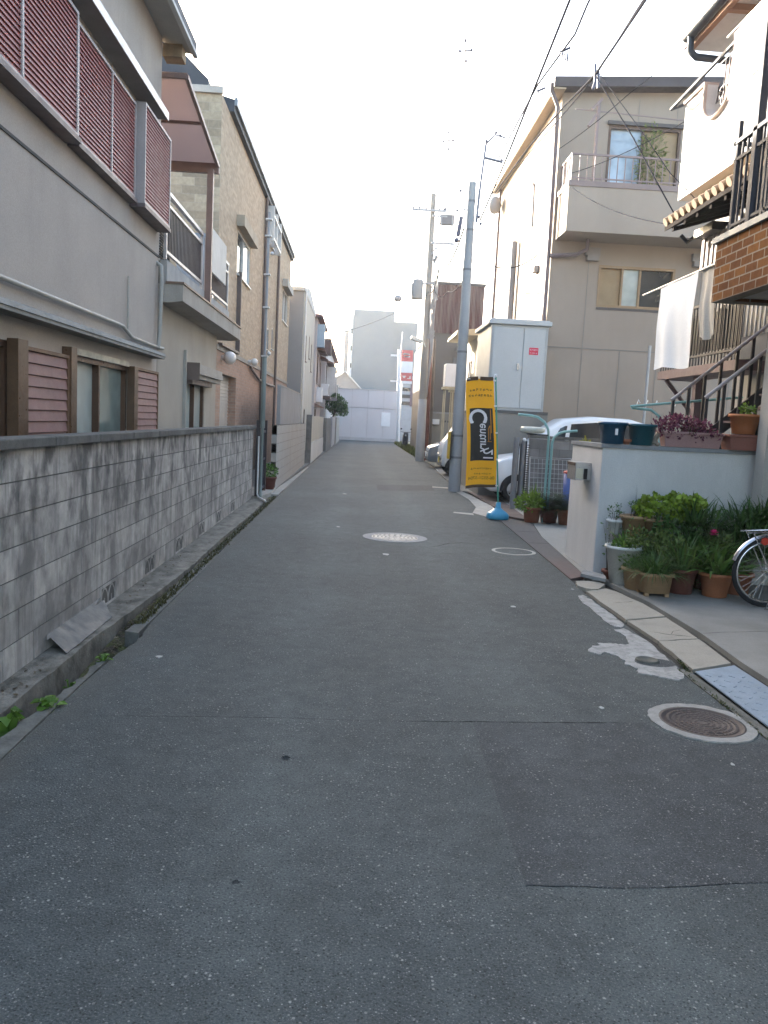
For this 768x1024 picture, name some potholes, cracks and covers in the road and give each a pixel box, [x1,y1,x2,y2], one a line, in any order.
manhole cover [647,703,759,744]
utility cover [635,656,676,667]
manhole cover [363,532,427,543]
